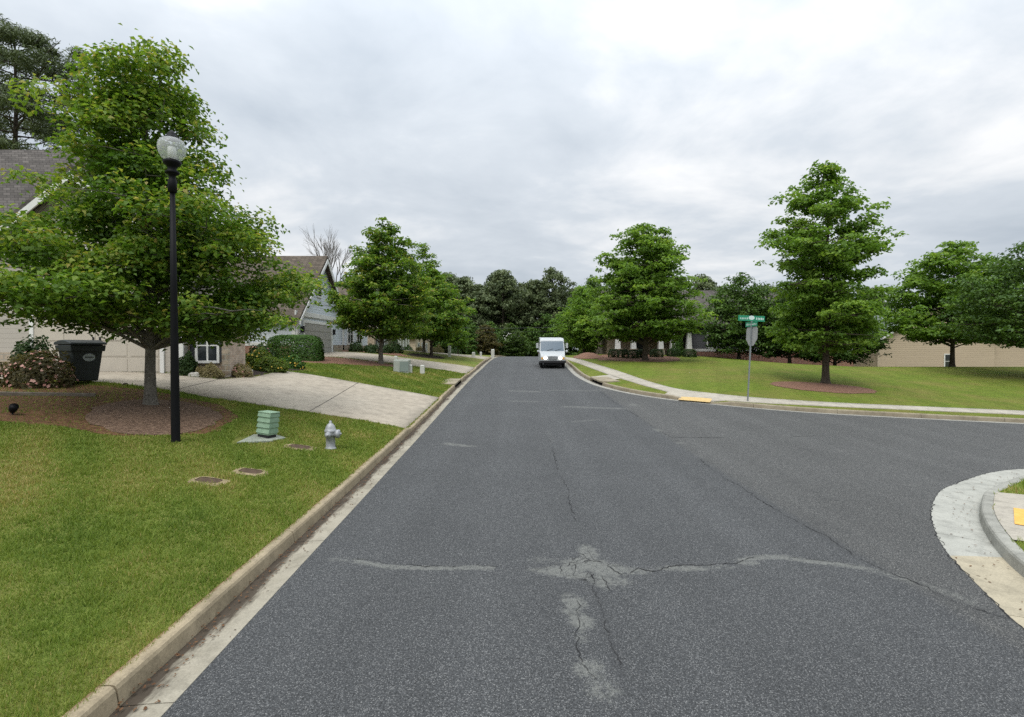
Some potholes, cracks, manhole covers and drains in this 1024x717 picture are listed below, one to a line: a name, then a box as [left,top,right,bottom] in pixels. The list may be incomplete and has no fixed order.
crack [536,468,1024,687]
